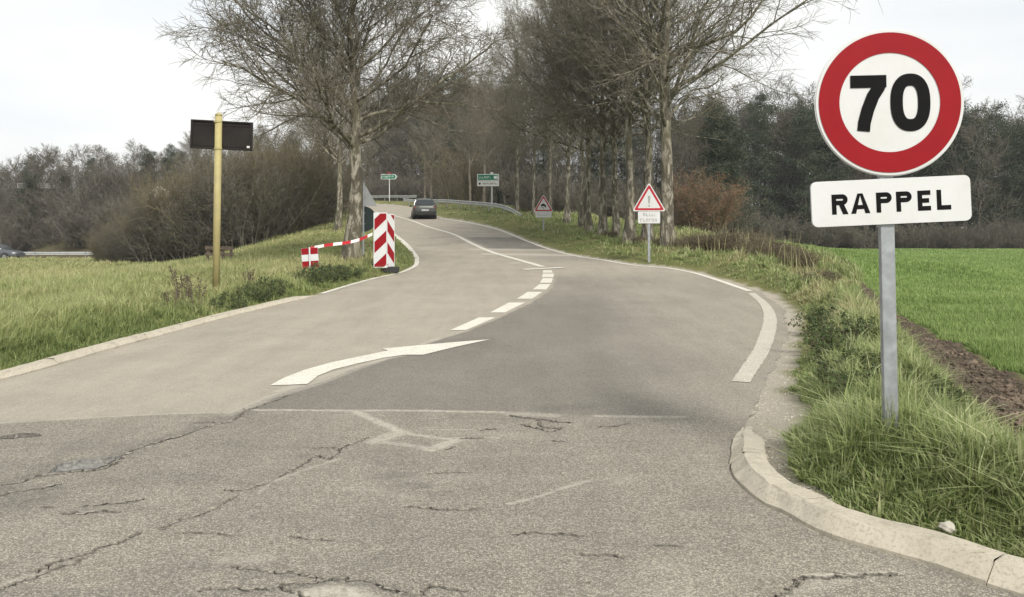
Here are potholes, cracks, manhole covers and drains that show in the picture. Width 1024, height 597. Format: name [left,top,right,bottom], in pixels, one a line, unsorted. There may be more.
crack [0,394,369,591]
crack [776,571,898,597]
crack [512,530,622,558]
crack [446,415,573,450]
crack [198,565,467,597]
